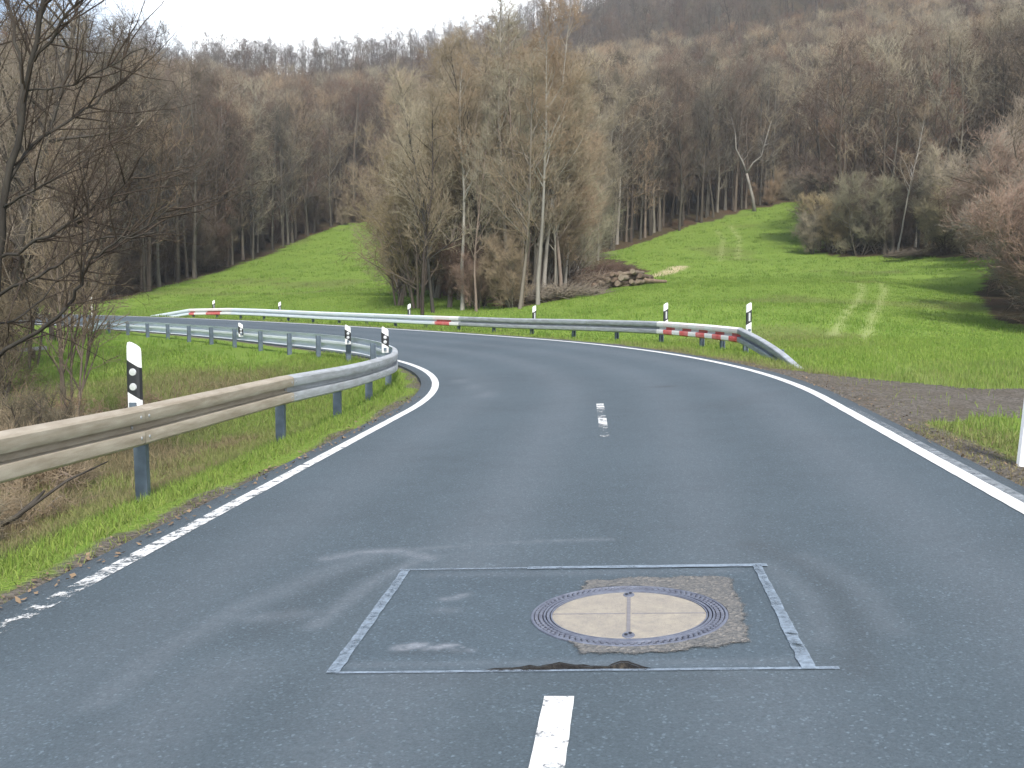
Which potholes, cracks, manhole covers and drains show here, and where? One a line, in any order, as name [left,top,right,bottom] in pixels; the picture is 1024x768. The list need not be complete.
pothole [487,661,652,672]
manhole cover [531,586,729,647]
